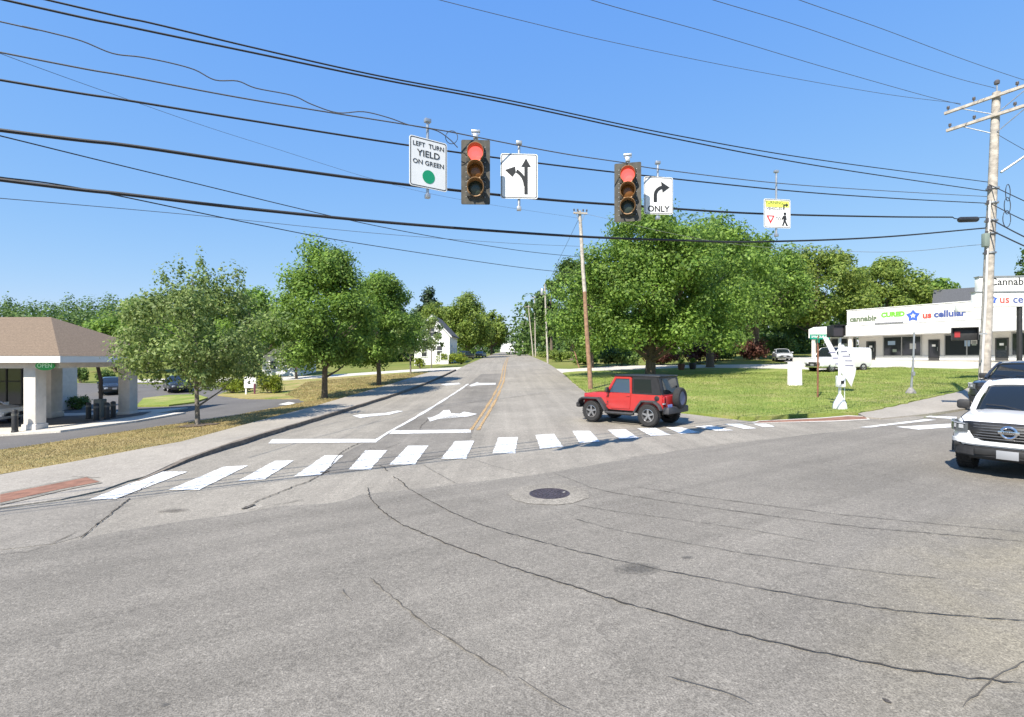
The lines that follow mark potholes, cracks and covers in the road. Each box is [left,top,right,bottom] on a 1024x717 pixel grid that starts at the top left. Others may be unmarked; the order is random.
crack [53,498,130,543]
crack [367,487,1023,683]
manhole cover [509,484,589,505]
crack [670,676,752,704]
crack [371,578,573,710]
